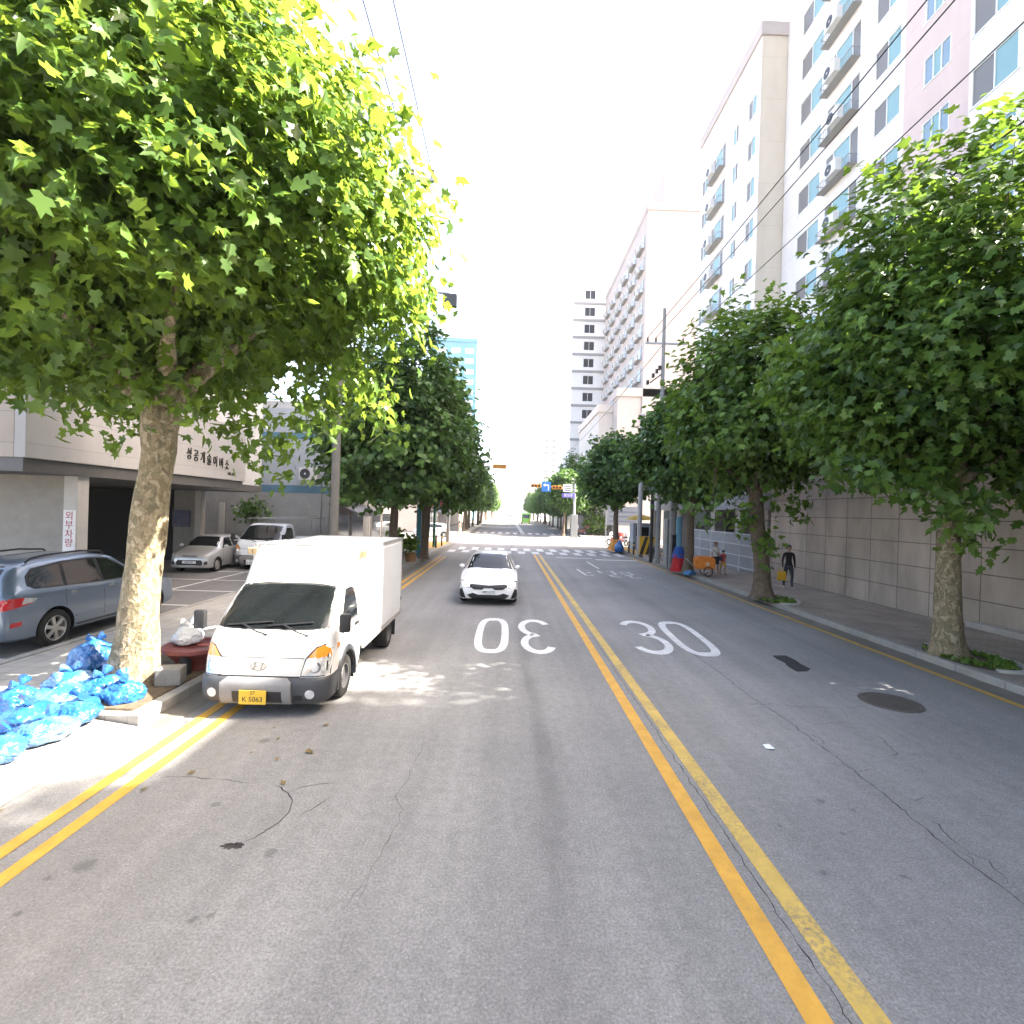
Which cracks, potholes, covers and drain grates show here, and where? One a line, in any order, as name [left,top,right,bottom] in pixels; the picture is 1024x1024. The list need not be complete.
crack [158,776,328,842]
manhole cover [857,692,926,713]
crack [316,742,424,1024]
crack [648,620,1024,904]
